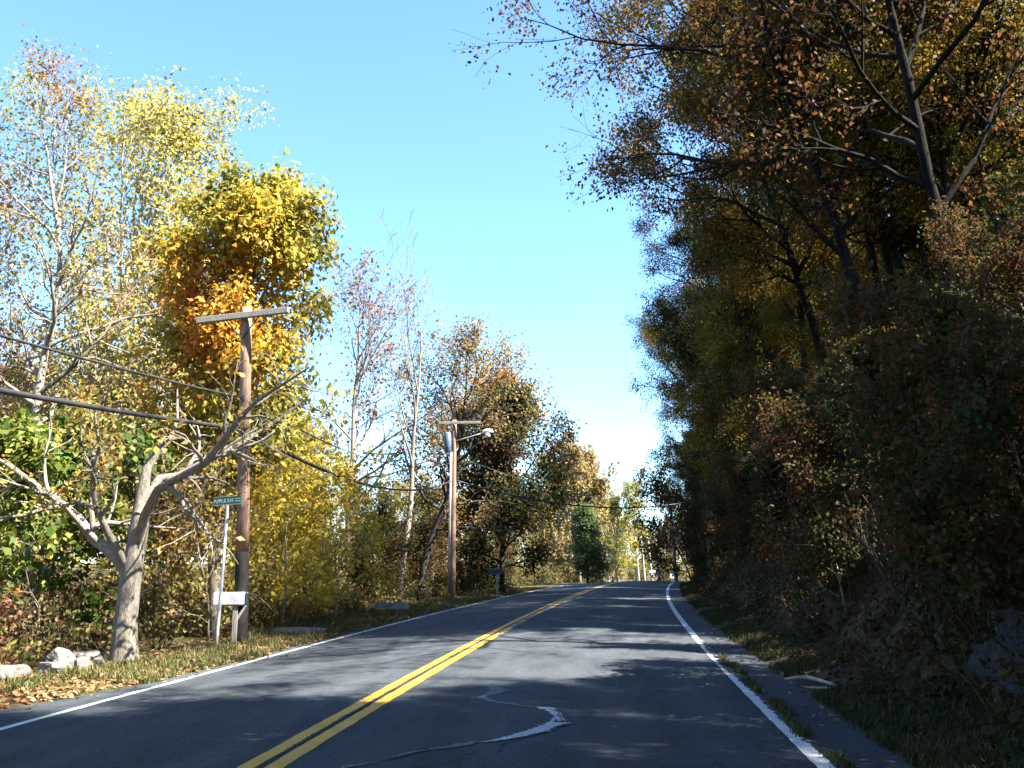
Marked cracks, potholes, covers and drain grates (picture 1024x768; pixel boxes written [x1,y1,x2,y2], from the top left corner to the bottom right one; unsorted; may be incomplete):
crack [340,686,571,768]
